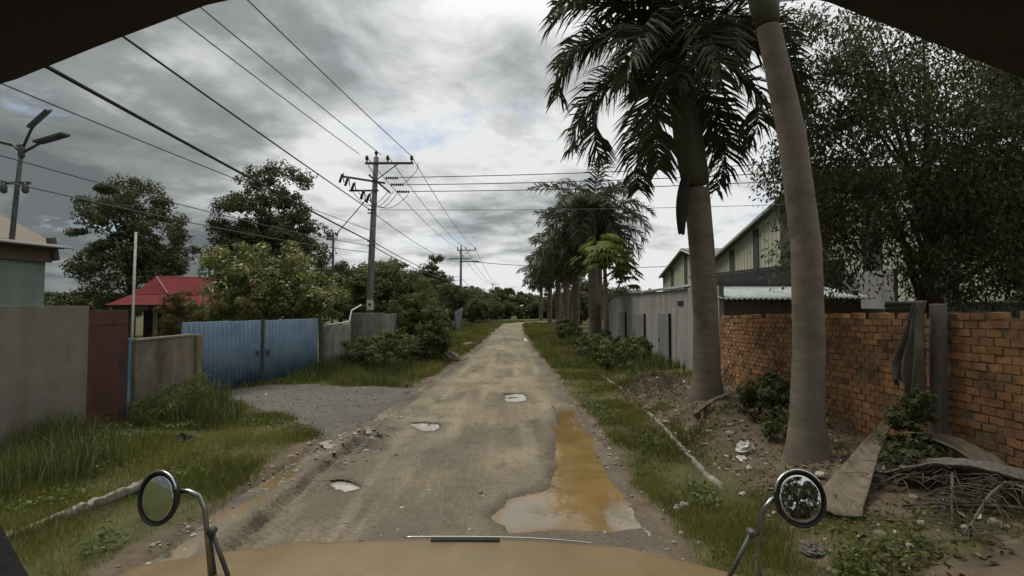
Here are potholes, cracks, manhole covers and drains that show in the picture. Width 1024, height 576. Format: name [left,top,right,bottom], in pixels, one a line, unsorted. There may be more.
pothole [321,476,368,494]
pothole [501,393,530,403]
pothole [406,421,445,432]
